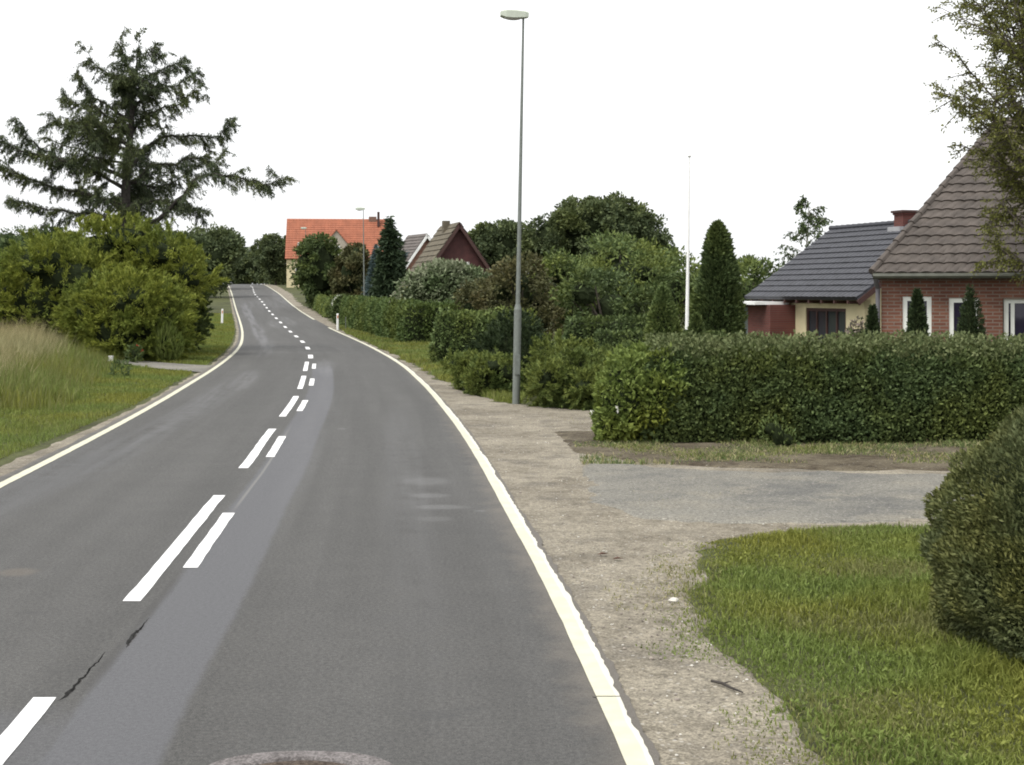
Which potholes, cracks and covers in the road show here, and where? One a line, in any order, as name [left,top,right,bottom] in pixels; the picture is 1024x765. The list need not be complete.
crack [126,618,149,647]
manhole cover [209,751,393,765]
crack [58,652,105,701]
